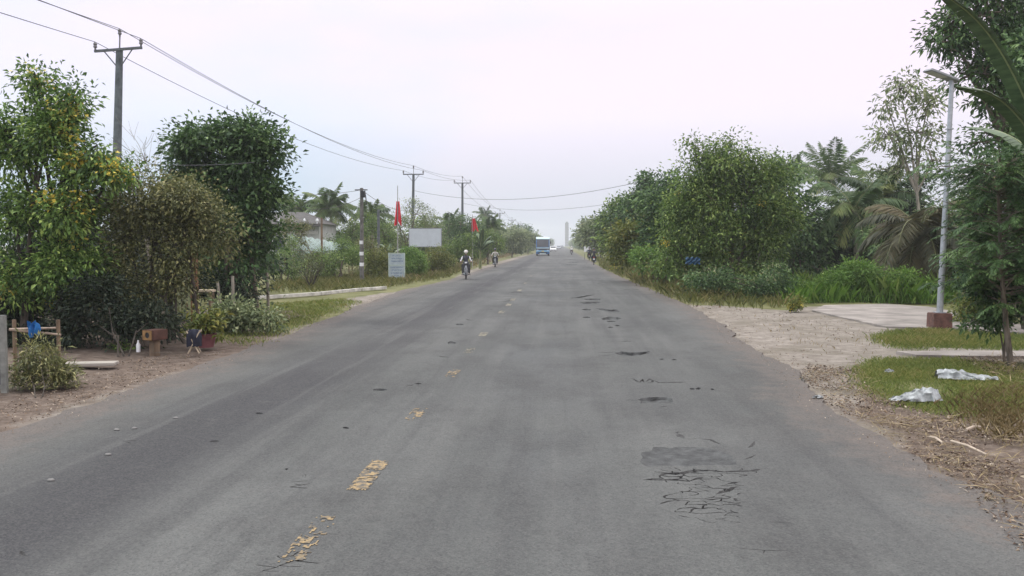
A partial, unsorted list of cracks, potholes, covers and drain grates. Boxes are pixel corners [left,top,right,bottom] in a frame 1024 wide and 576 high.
crack [644,441,760,523]
